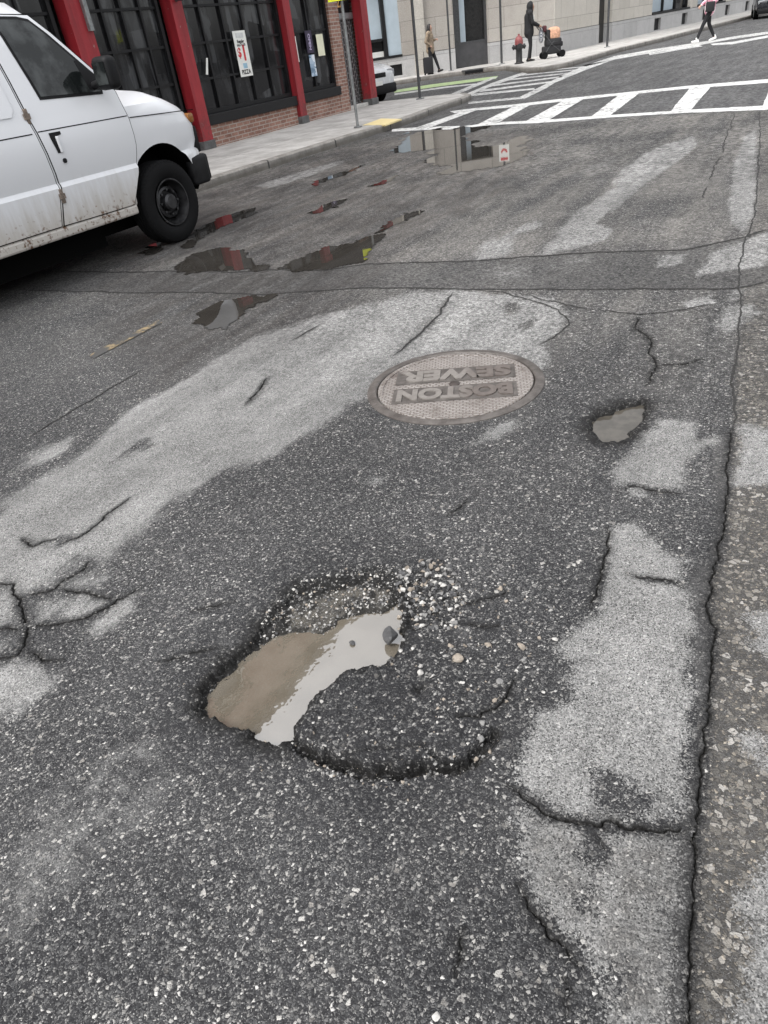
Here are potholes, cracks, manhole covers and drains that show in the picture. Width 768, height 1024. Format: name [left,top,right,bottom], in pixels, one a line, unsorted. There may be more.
crack [504,111,761,1024]
crack [0,497,236,667]
crack [25,370,141,439]
pothole [110,518,592,894]
manhole cover [367,350,545,426]
crack [398,294,452,352]
